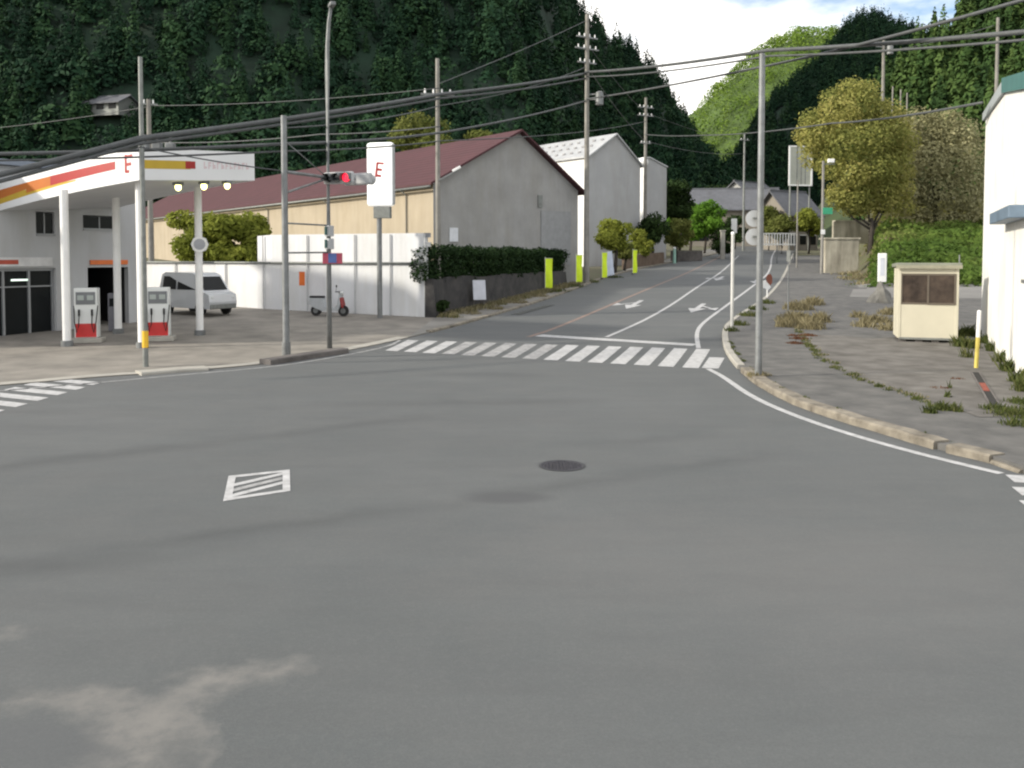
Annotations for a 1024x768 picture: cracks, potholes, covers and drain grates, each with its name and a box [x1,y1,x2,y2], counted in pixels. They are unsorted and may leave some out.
manhole cover [539,460,585,471]
